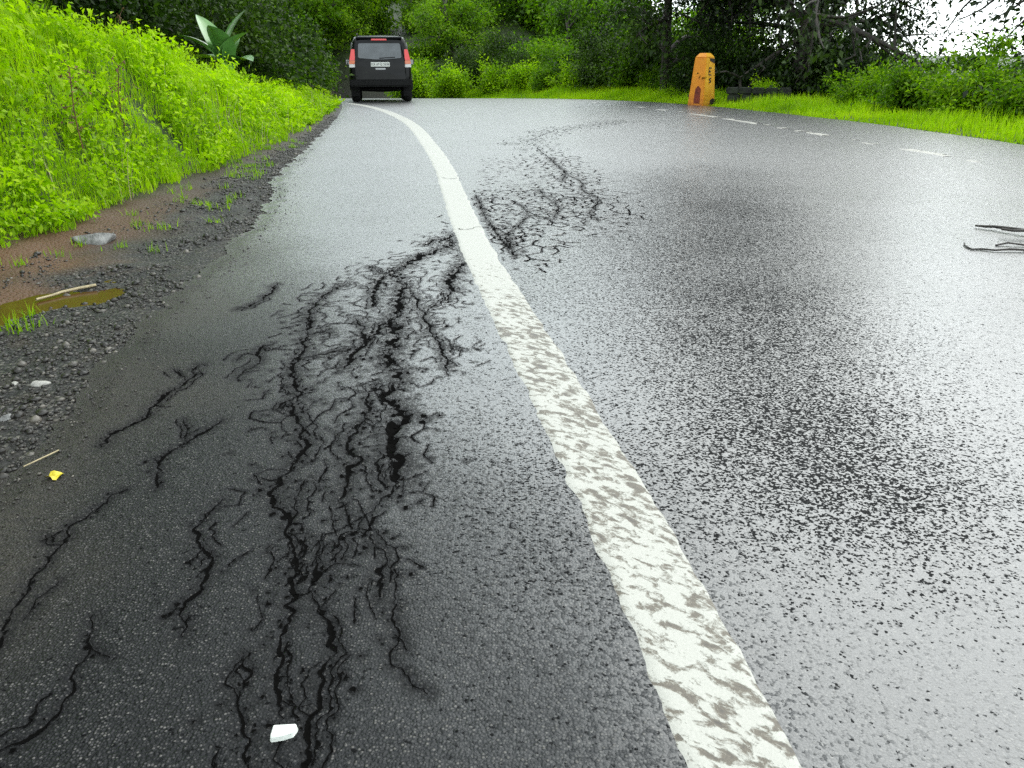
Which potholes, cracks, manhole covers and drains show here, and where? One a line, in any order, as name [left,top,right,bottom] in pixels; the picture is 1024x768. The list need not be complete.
crack [192,219,504,768]
crack [161,499,223,637]
crack [0,489,126,768]
crack [99,365,221,488]
crack [438,120,648,272]
